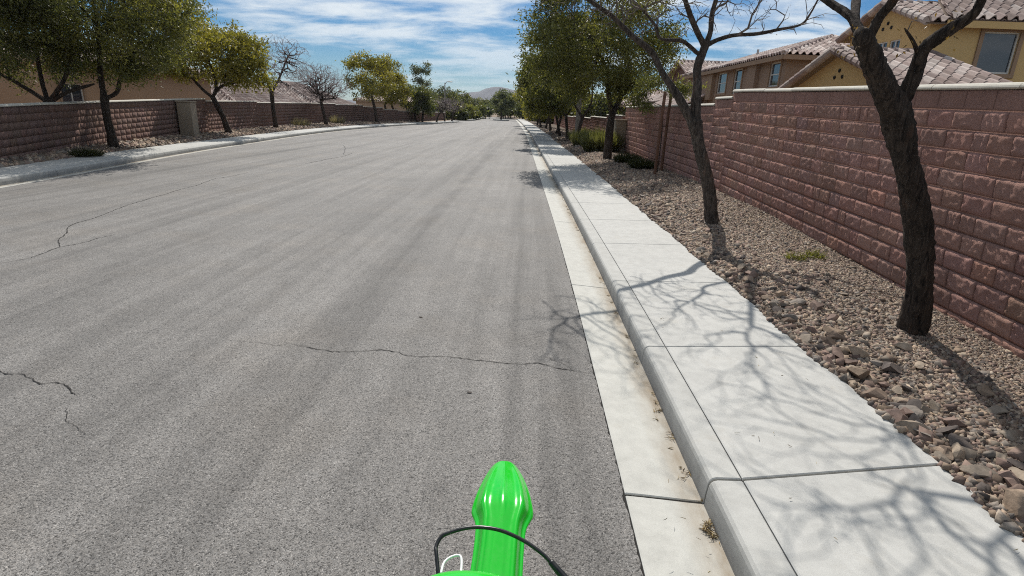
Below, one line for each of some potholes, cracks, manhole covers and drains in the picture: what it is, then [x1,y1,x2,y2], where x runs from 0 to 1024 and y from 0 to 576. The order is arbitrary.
crack [0,371,85,433]
crack [246,341,574,371]
crack [0,172,247,264]
